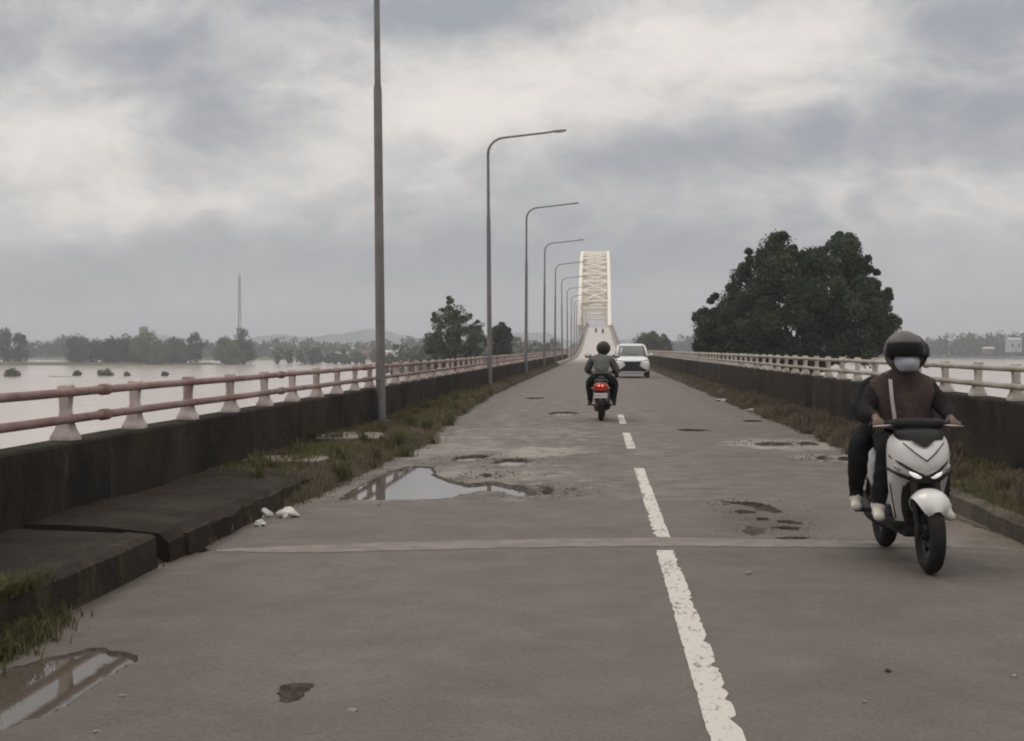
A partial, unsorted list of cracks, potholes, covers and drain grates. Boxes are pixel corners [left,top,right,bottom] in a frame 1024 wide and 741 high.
pothole [742,525,766,535]
pothole [276,683,315,703]
pothole [0,647,138,730]
pothole [339,466,538,500]
